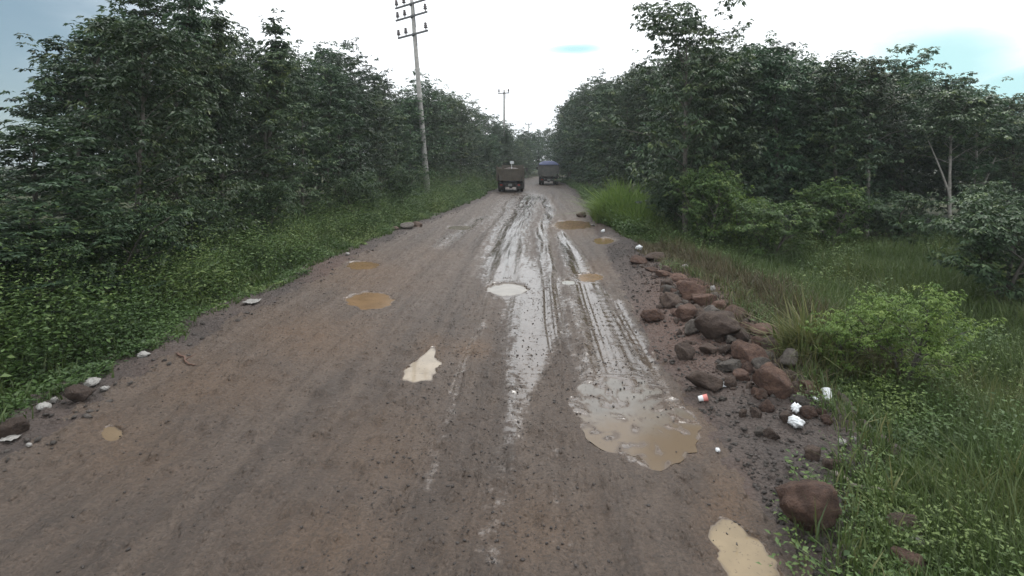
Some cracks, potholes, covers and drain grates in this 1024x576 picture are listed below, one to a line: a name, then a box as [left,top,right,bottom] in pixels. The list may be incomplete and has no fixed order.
pothole [339,289,400,312]
pothole [93,422,132,444]
pothole [696,512,792,576]
pothole [341,260,385,271]
pothole [480,281,534,297]
pothole [589,235,620,245]
pothole [546,219,598,231]
pothole [398,344,447,384]
pothole [562,374,710,476]
pothole [572,271,609,283]
